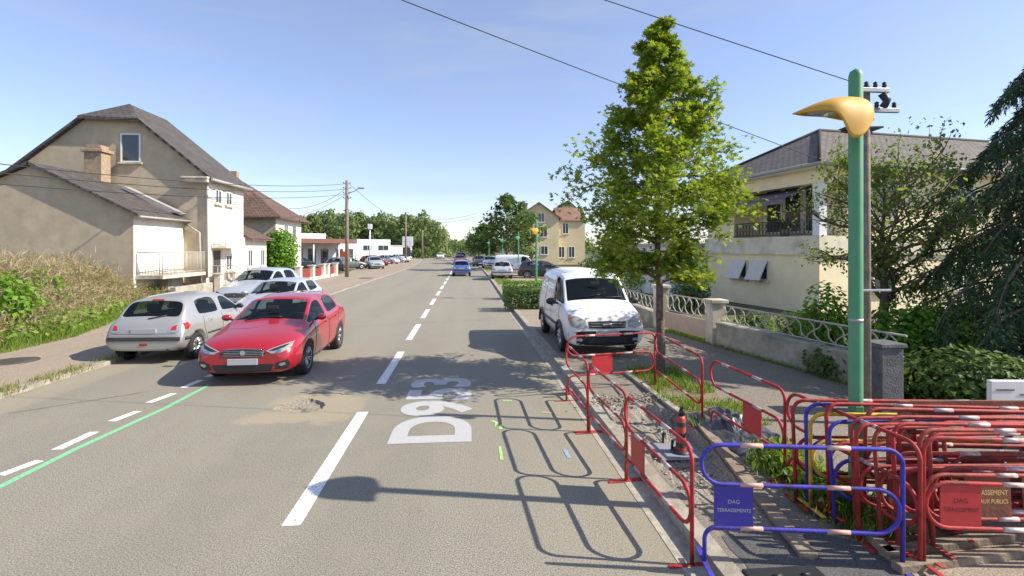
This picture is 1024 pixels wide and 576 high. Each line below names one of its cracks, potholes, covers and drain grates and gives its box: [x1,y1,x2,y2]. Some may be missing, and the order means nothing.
manhole cover [742,565,825,576]
pothole [270,398,325,414]
